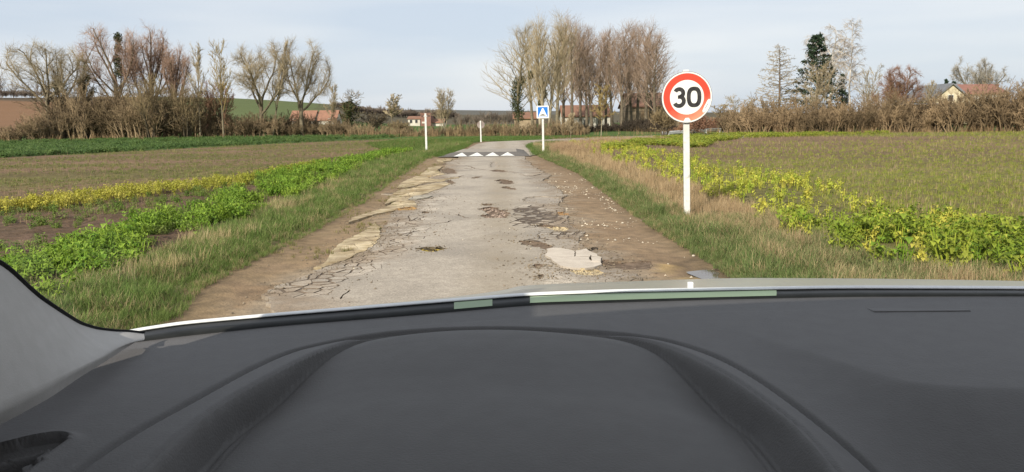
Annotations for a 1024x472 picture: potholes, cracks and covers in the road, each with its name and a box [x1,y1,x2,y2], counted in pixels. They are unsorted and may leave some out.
crack [256,163,545,302]
pothole [519,240,553,249]
pothole [602,259,653,270]
pothole [479,207,511,218]
